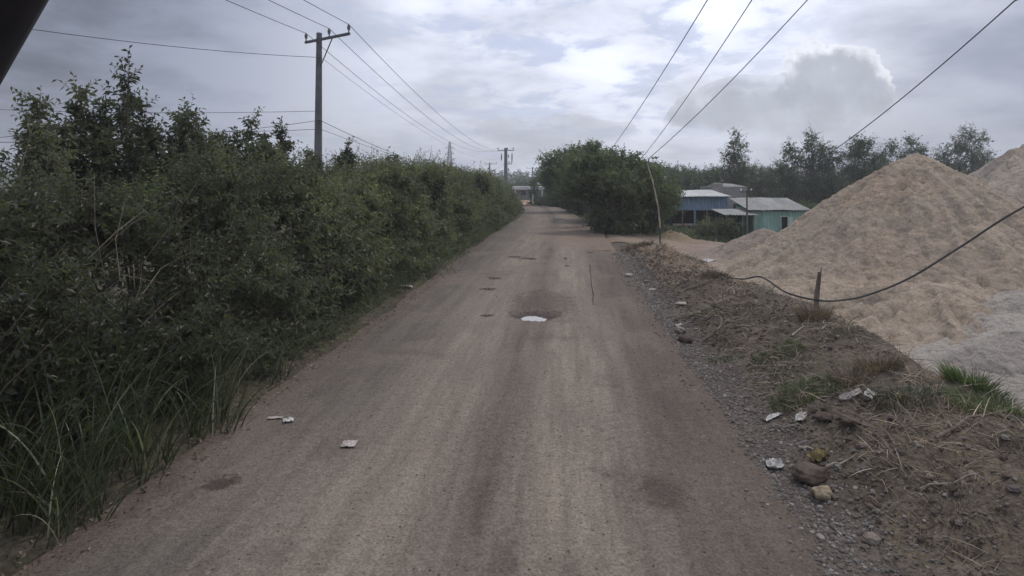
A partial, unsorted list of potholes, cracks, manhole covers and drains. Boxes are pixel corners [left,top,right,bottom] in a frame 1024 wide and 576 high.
pothole [507,307,562,322]
